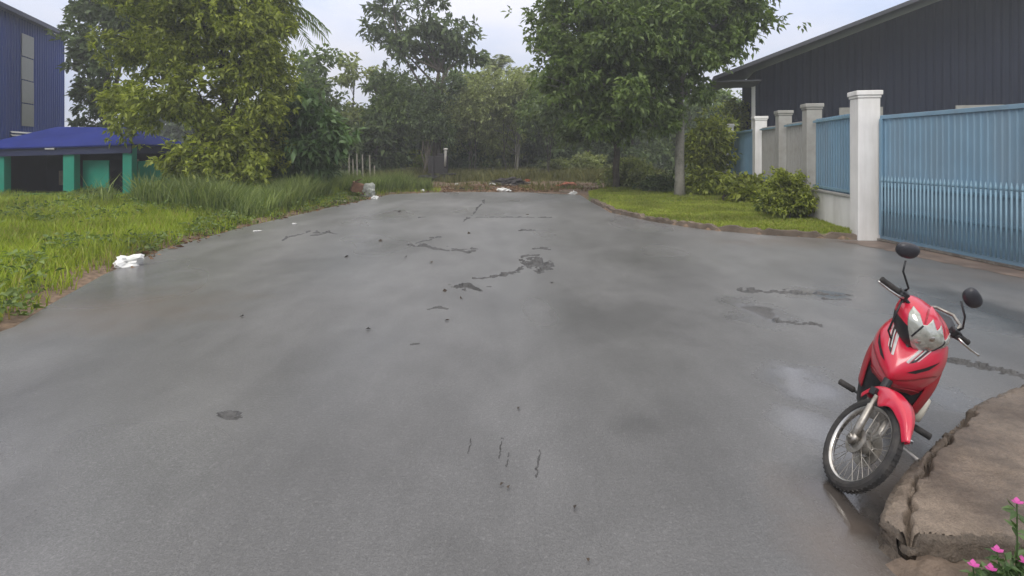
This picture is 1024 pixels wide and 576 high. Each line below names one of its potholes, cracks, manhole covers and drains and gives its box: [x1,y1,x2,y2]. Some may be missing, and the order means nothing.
pothole [216,410,243,420]
crack [947,357,1024,380]
pothole [448,283,492,291]
crack [407,199,552,253]
crack [737,287,852,301]
crack [771,318,822,327]
